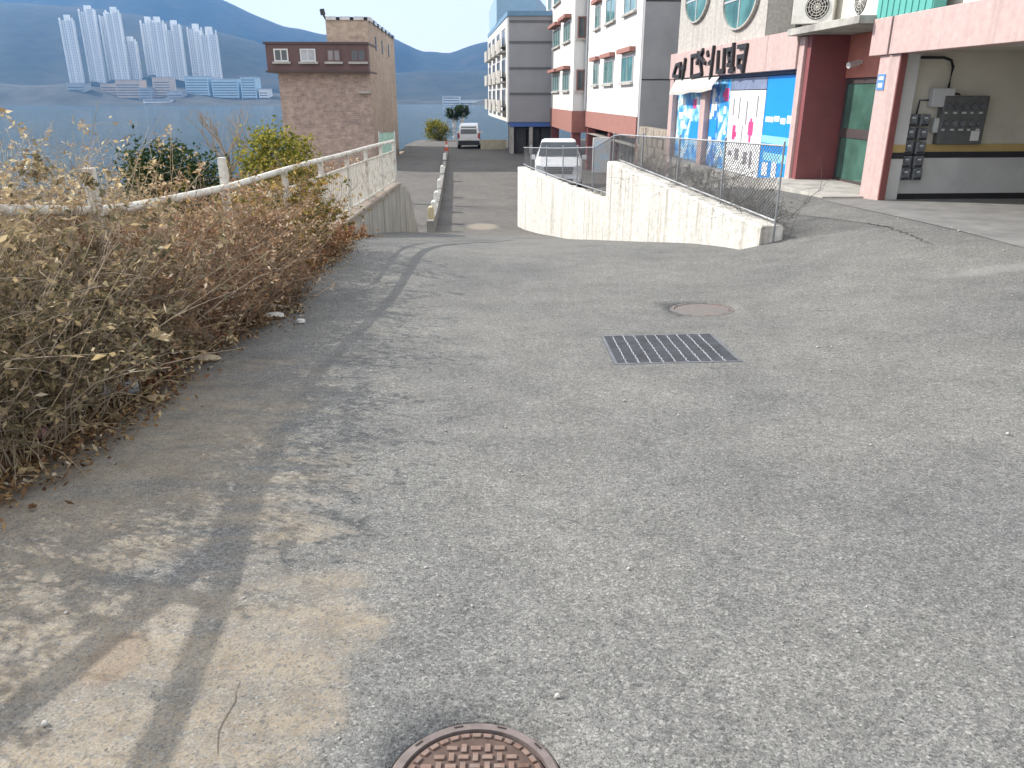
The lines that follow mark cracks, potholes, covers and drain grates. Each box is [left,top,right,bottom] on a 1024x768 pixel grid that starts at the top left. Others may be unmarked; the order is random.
manhole cover [393,723,558,768]
crack [867,222,933,245]
drain grate [601,333,743,365]
manhole cover [670,303,735,316]
